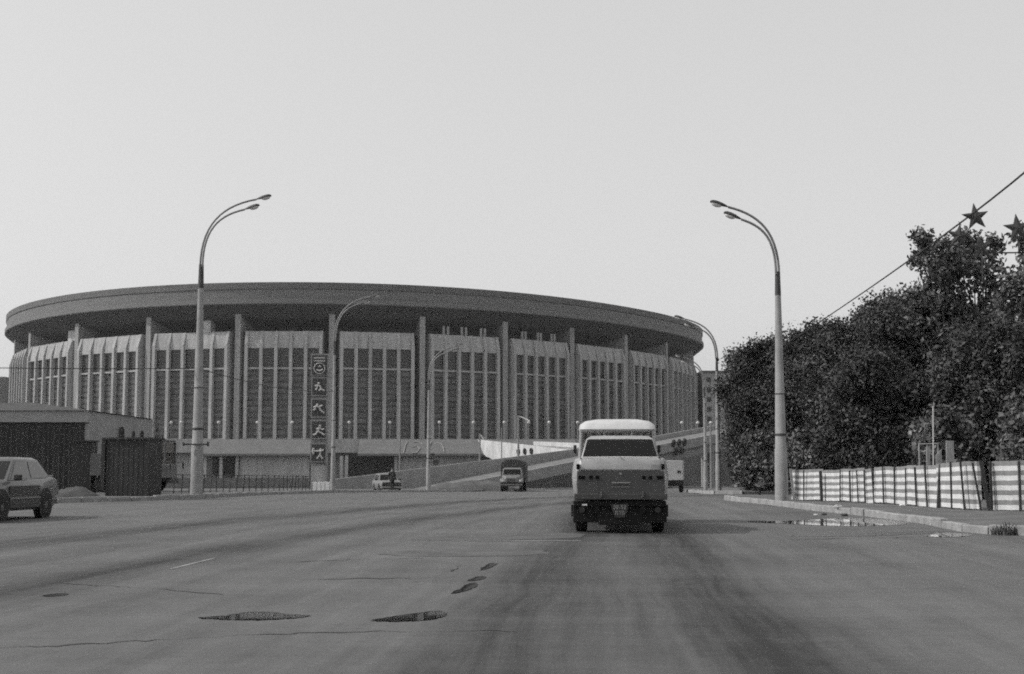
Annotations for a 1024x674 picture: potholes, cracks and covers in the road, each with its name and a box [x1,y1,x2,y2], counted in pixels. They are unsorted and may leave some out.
crack [62,582,220,594]
pothole [372,610,447,622]
pothole [452,582,478,594]
pothole [198,611,312,621]
